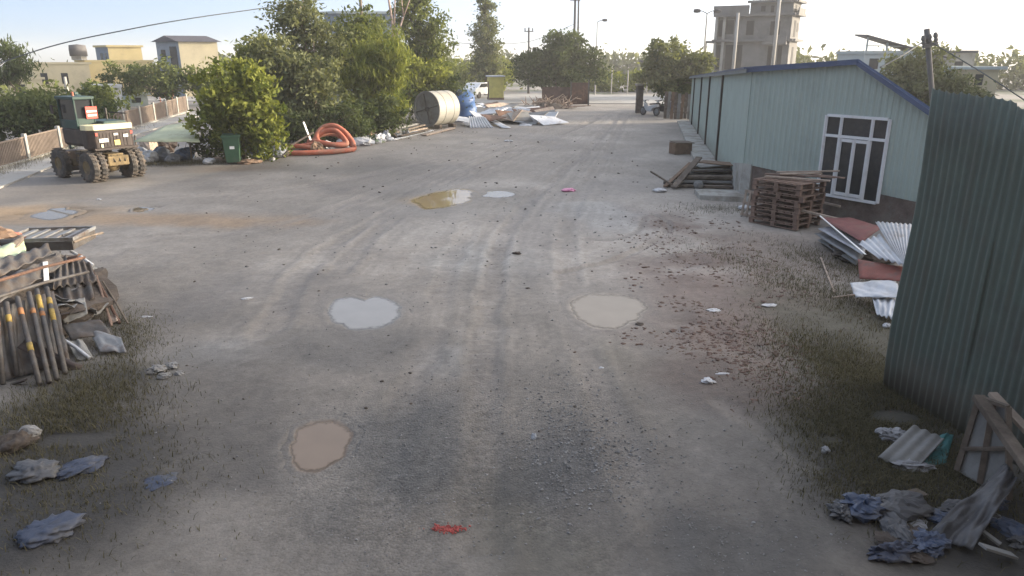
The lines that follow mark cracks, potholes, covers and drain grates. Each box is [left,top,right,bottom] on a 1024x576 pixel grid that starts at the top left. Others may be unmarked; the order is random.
pothole [400,186,487,213]
pothole [559,289,659,335]
pothole [280,415,363,482]
pothole [20,204,87,222]
pothole [472,190,521,199]
pothole [316,293,413,337]
